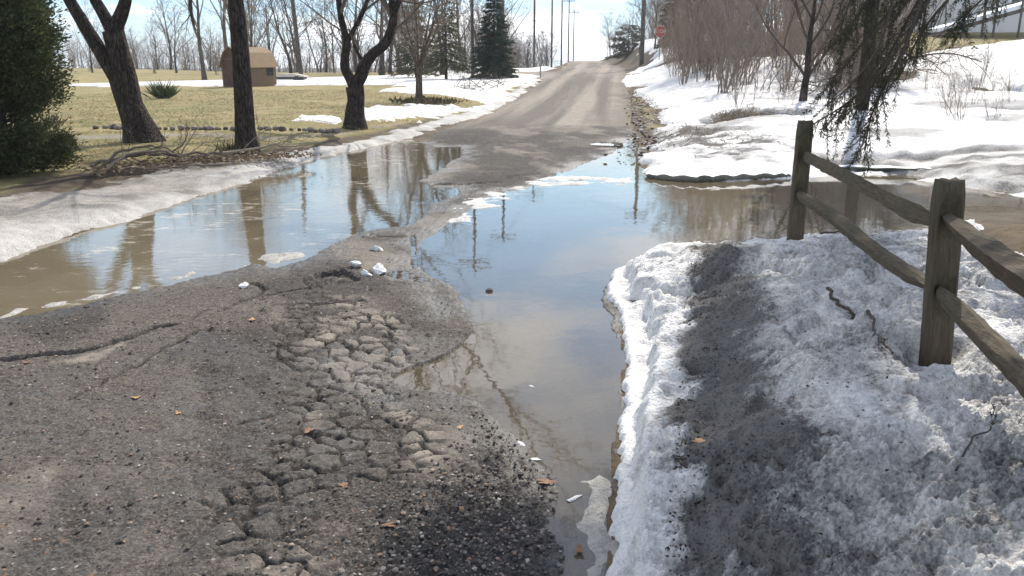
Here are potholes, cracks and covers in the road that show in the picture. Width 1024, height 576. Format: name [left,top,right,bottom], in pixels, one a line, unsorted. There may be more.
crack [212,293,428,576]
crack [73,316,198,399]
